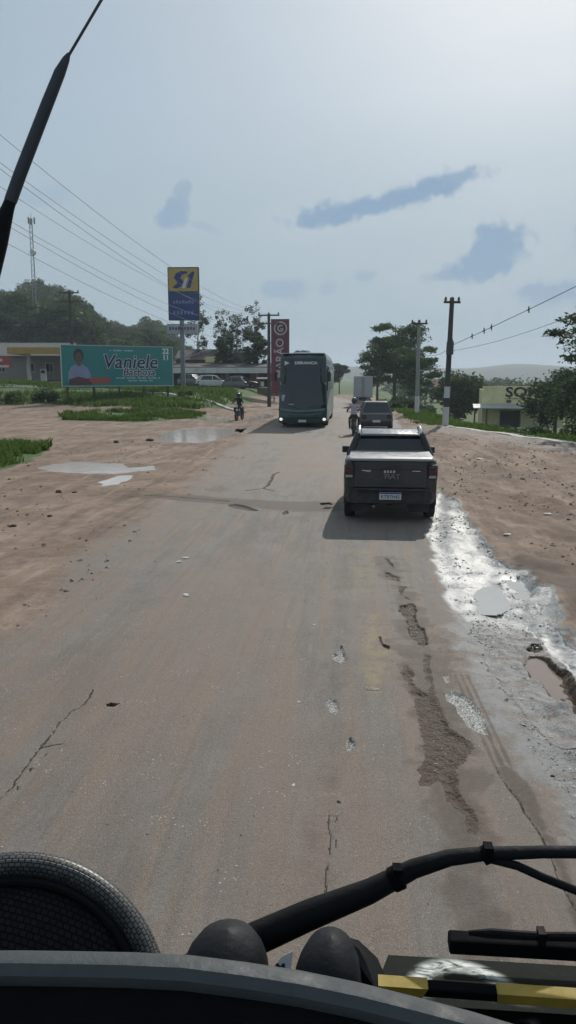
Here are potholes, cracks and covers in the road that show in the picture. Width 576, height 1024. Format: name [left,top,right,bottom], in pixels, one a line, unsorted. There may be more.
crack [478,751,576,932]
pothole [198,501,277,516]
pothole [289,685,379,728]
crack [0,676,131,840]
crack [108,469,308,504]
crack [269,789,383,959]
